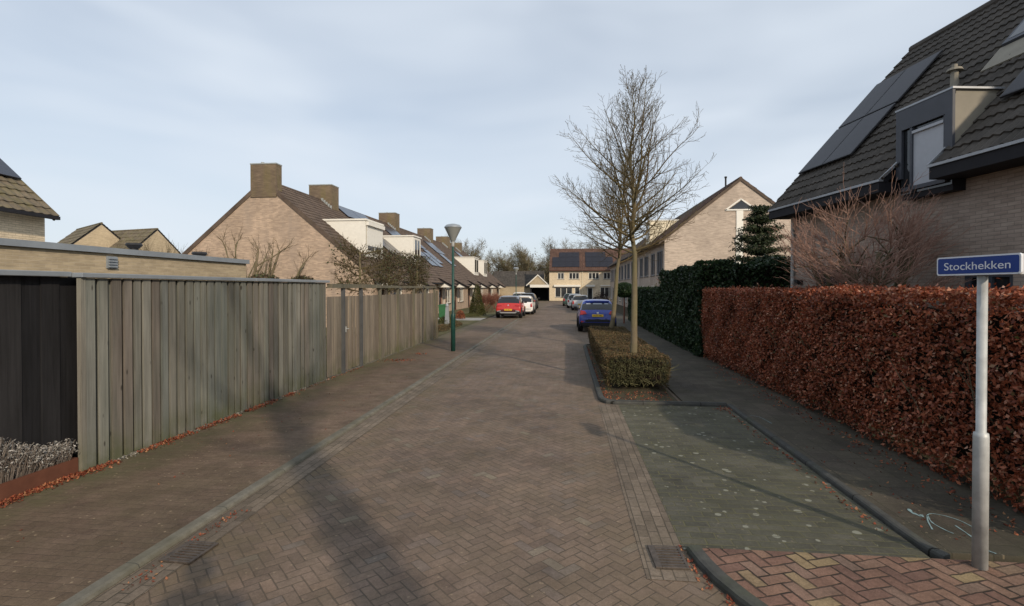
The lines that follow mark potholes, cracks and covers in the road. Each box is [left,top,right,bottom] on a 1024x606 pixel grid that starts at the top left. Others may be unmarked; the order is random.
drain grate [647,545,690,570]
drain grate [158,540,219,564]
